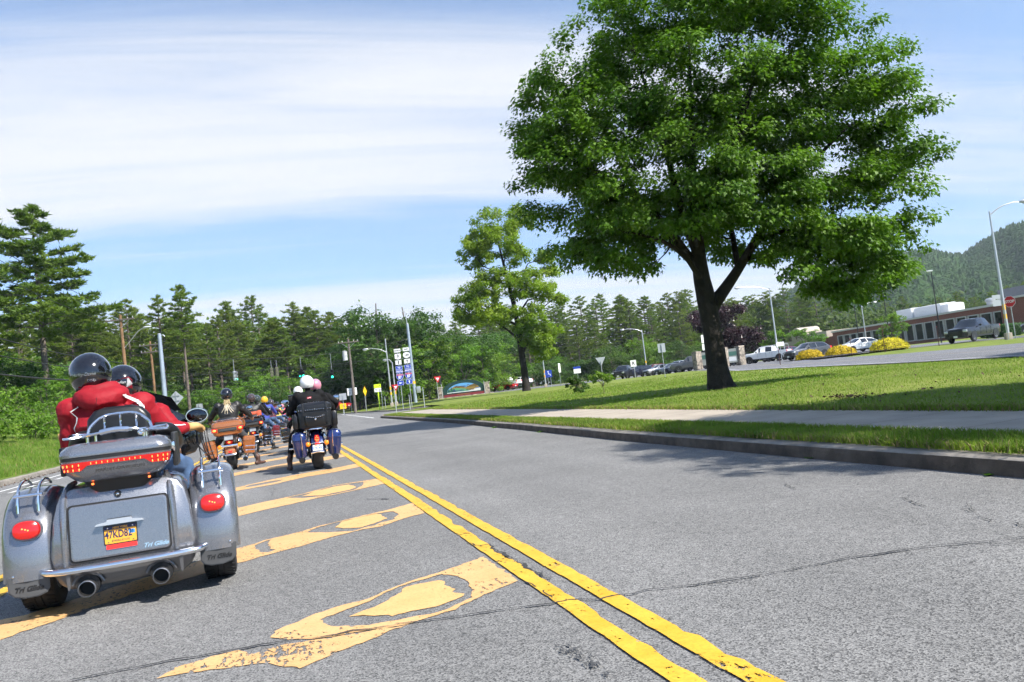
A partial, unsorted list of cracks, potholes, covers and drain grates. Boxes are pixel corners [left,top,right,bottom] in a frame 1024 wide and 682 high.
crack [70,536,1024,680]
